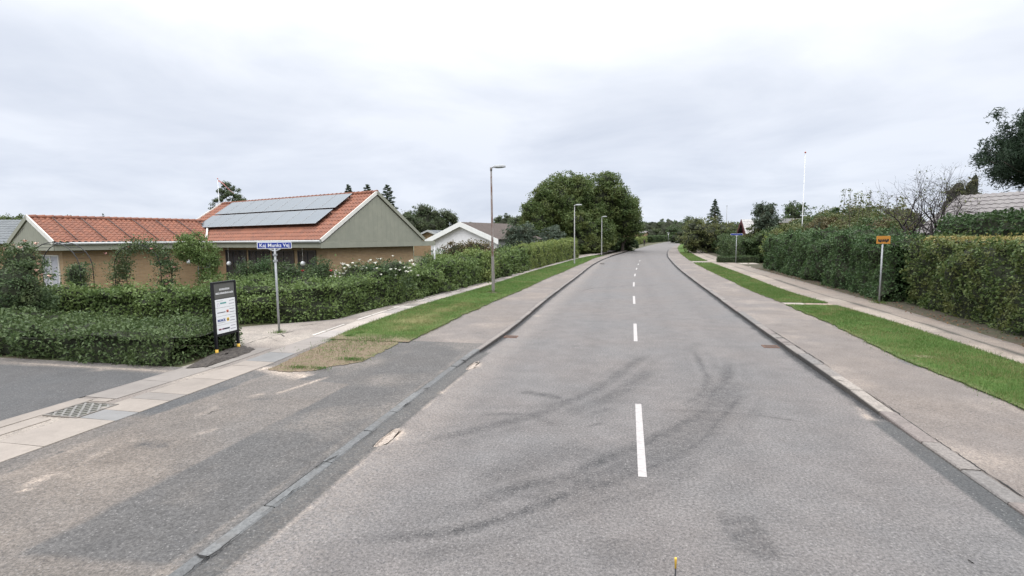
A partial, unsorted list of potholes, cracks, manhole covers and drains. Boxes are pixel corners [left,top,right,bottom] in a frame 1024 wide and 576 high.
pothole [374,428,400,447]
